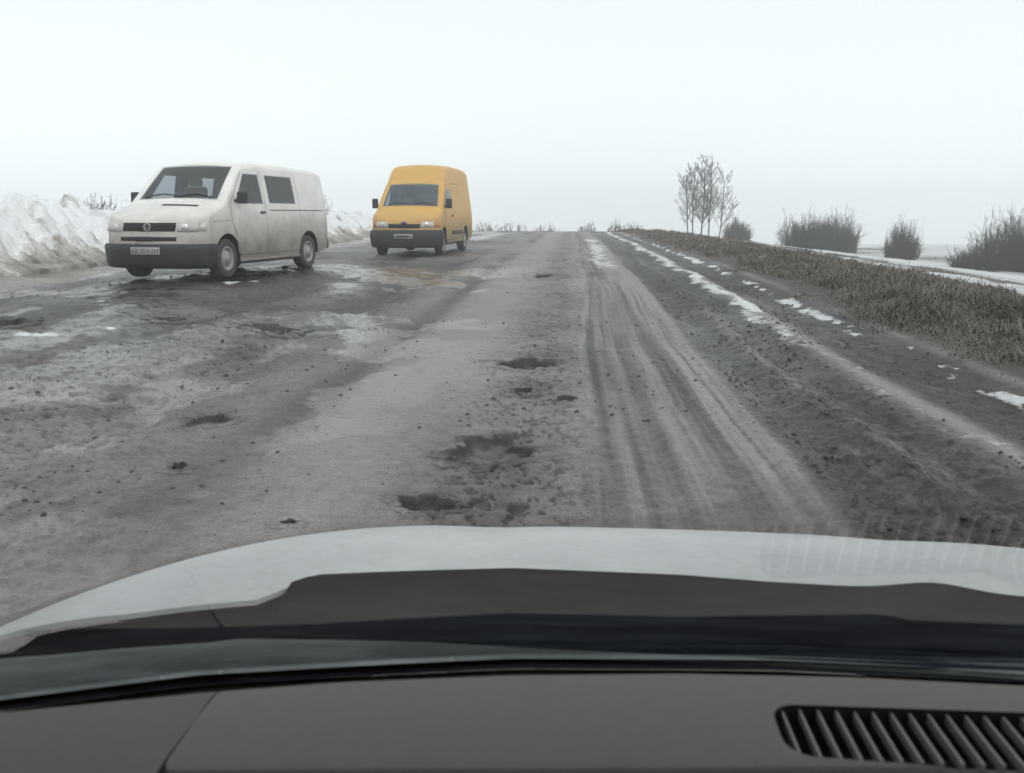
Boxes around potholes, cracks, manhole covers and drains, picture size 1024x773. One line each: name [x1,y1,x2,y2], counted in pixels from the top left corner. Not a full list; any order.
pothole [523,272,568,281]
pothole [478,356,572,374]
pothole [166,409,248,433]
pothole [426,431,554,474]
pothole [380,490,474,519]
pothole [541,392,592,407]
pothole [499,385,542,399]
